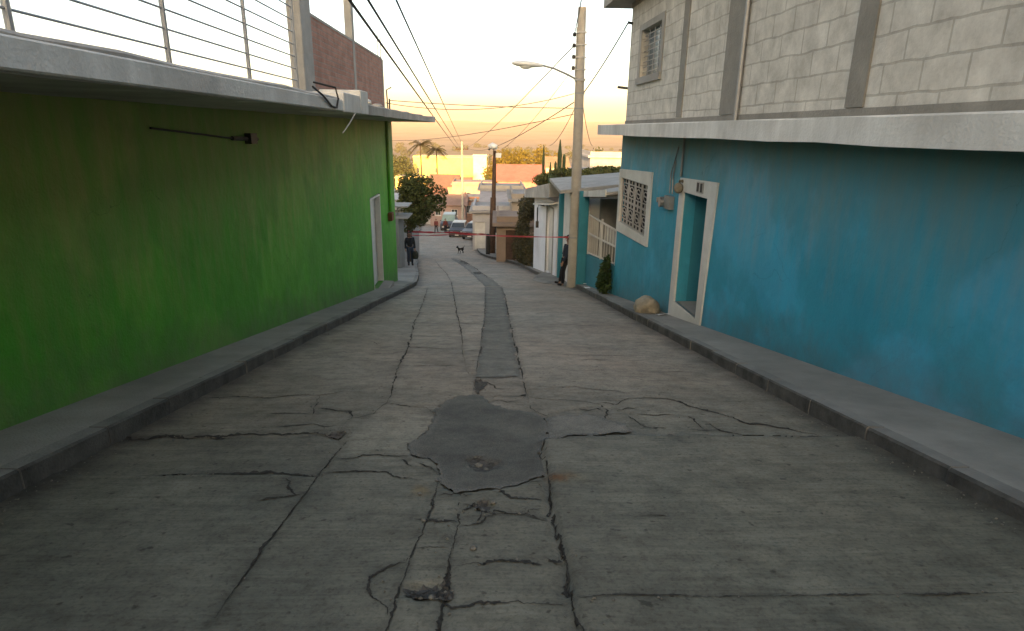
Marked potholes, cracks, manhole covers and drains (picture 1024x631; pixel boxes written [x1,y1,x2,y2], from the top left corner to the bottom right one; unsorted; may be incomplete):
crack [366,546,438,615]
pothole [467,458,500,472]
crack [126,288,431,440]
pothole [472,500,491,512]
crack [414,451,584,631]
pothole [473,379,487,394]
crack [439,259,838,438]
crack [143,454,438,501]
pothole [402,580,454,601]
